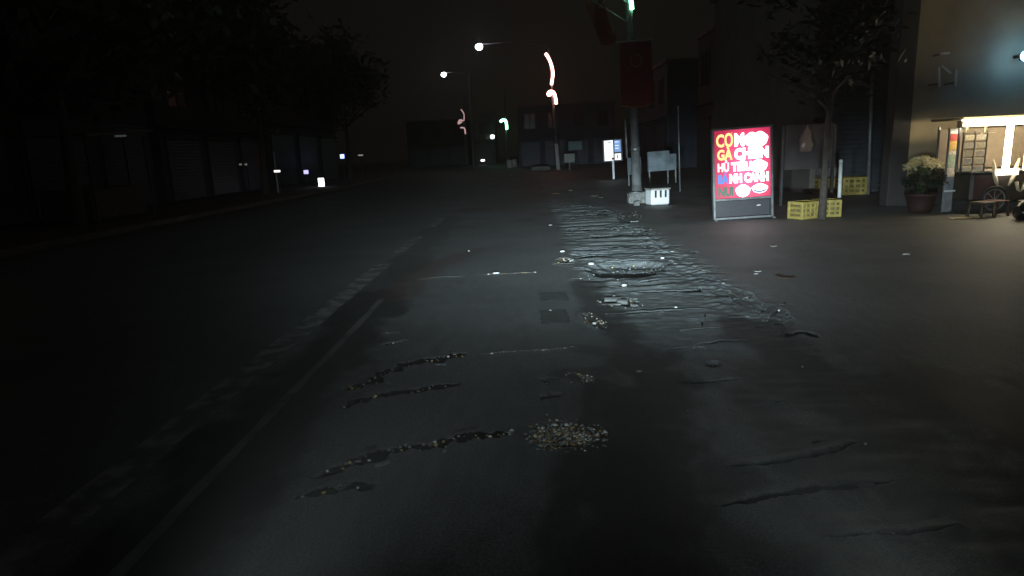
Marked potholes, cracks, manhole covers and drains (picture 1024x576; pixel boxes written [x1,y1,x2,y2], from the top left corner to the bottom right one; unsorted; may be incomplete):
crack [706,436,973,545]
pothole [590,295,651,311]
pothole [509,417,618,458]
pothole [575,310,615,334]
